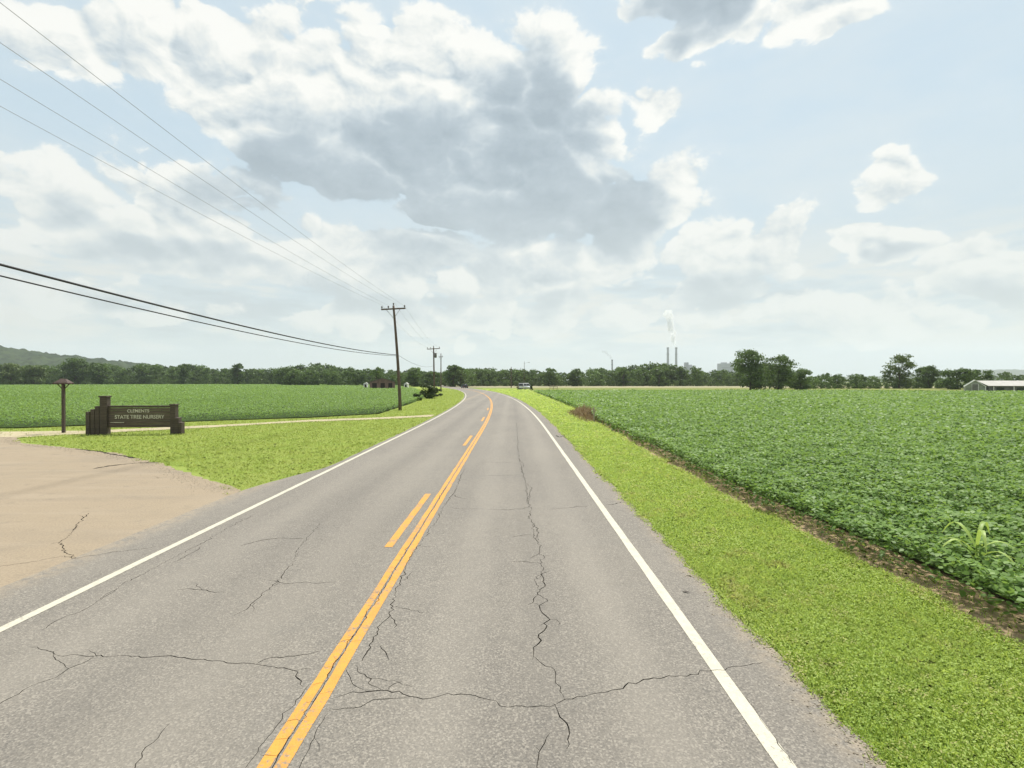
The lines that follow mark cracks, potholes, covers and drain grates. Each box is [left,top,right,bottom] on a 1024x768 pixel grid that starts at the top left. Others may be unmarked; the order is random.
crack [1,422,762,768]
